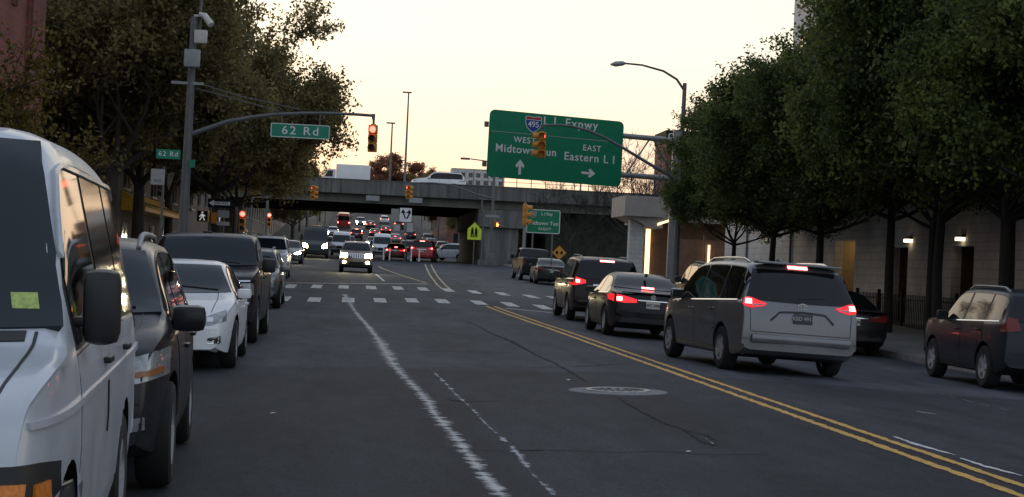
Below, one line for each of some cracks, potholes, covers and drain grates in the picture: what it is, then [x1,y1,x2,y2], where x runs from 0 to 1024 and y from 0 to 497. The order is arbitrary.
crack [569,397,749,455]
manhole cover [568,387,667,395]
crack [423,308,585,381]
